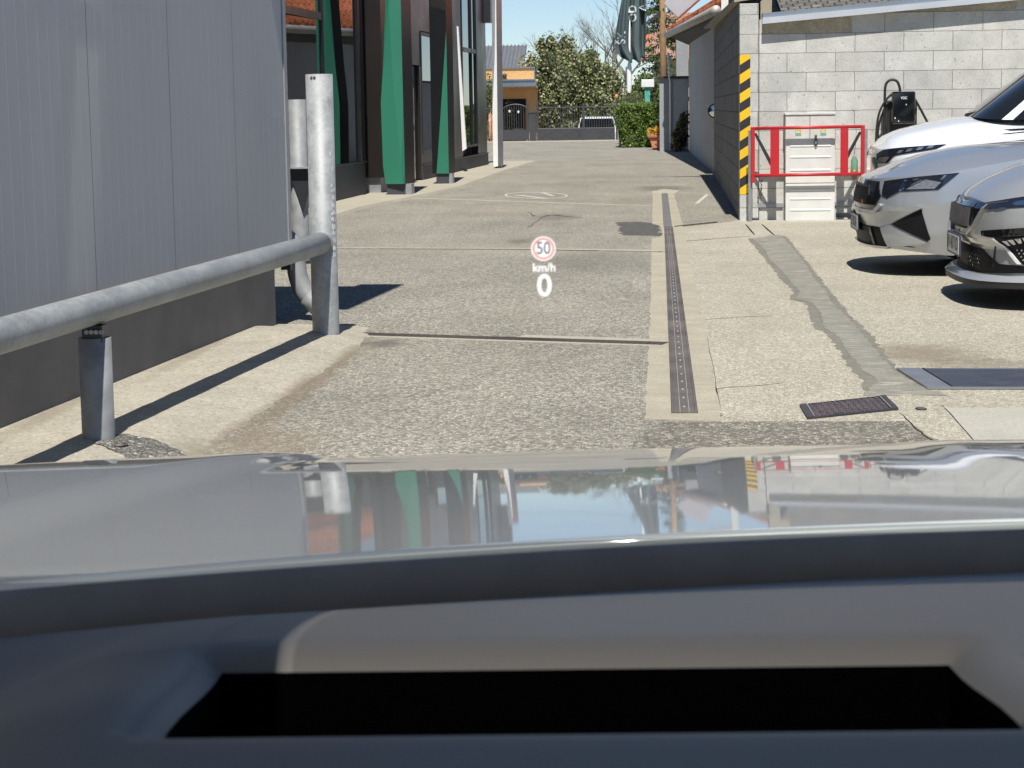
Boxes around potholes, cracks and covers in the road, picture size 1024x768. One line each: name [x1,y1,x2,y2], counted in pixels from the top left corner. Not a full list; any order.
manhole cover [896,368,1024,390]
